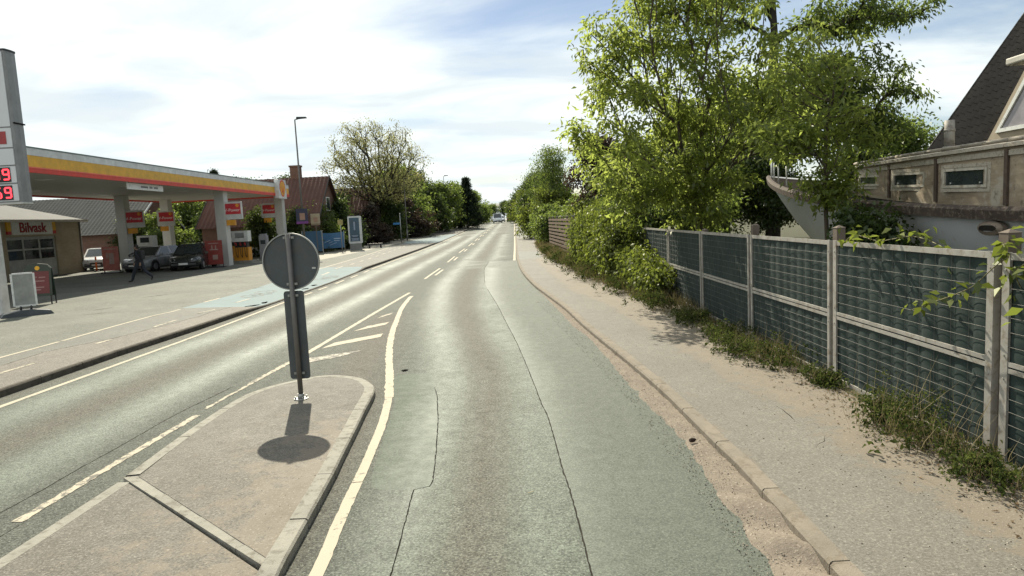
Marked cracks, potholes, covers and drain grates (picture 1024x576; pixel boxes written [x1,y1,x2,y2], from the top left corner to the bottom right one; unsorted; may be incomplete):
crack [390,387,439,576]
